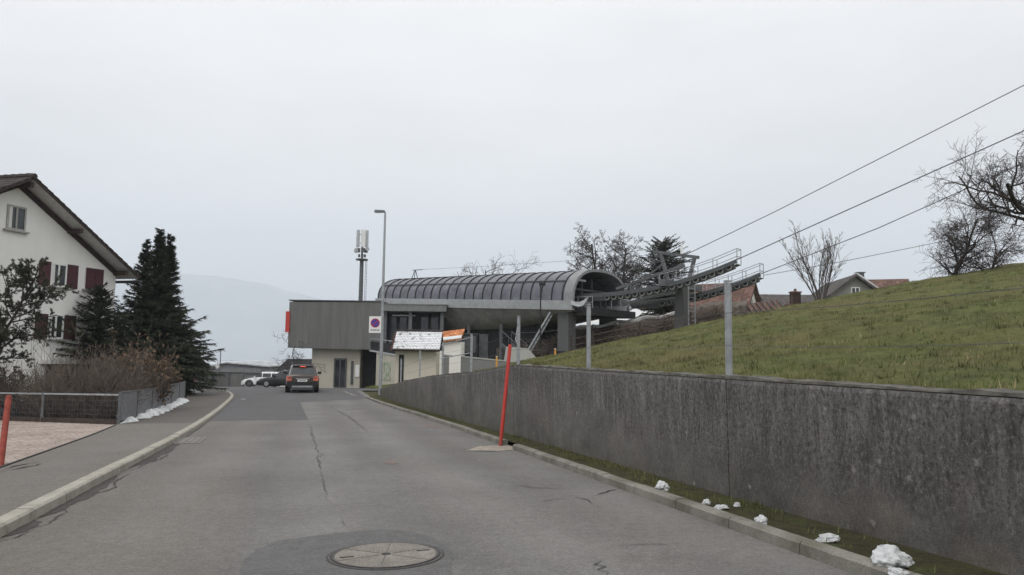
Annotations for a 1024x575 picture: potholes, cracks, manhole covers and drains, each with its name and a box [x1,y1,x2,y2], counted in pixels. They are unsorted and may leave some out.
manhole cover [326,542,444,570]
